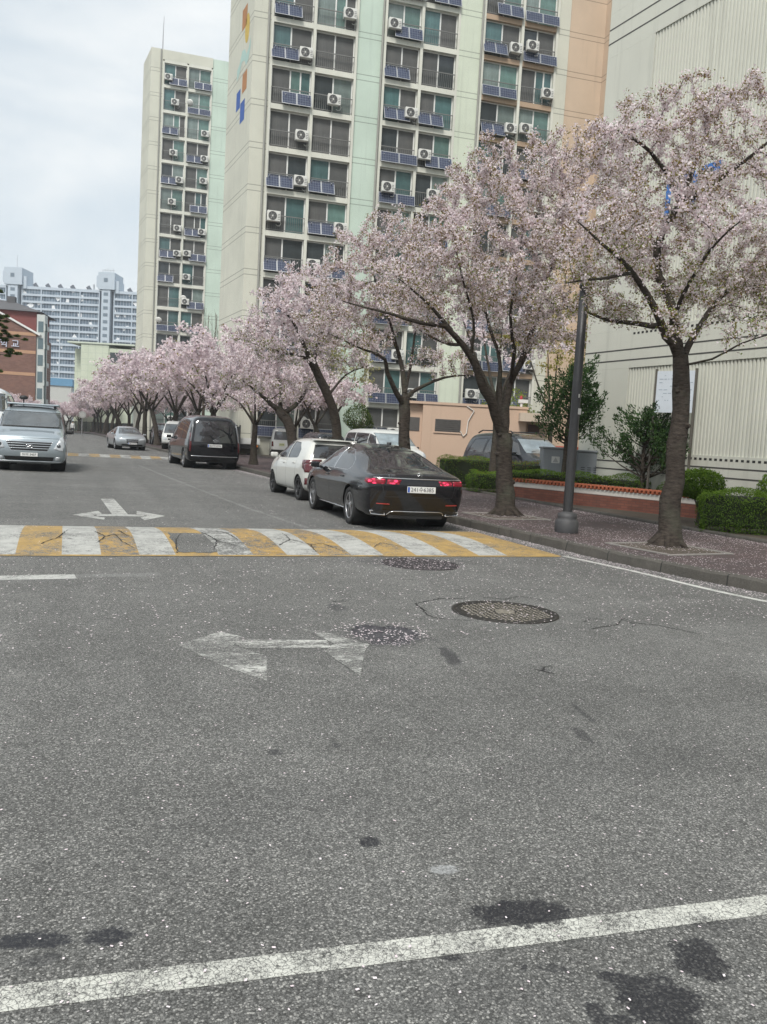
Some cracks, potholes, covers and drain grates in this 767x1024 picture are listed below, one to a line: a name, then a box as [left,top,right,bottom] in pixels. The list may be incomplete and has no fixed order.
crack [583,616,697,634]
crack [175,529,238,553]
crack [415,596,546,621]
manhole cover [451,601,559,624]
pothole [350,625,422,646]
